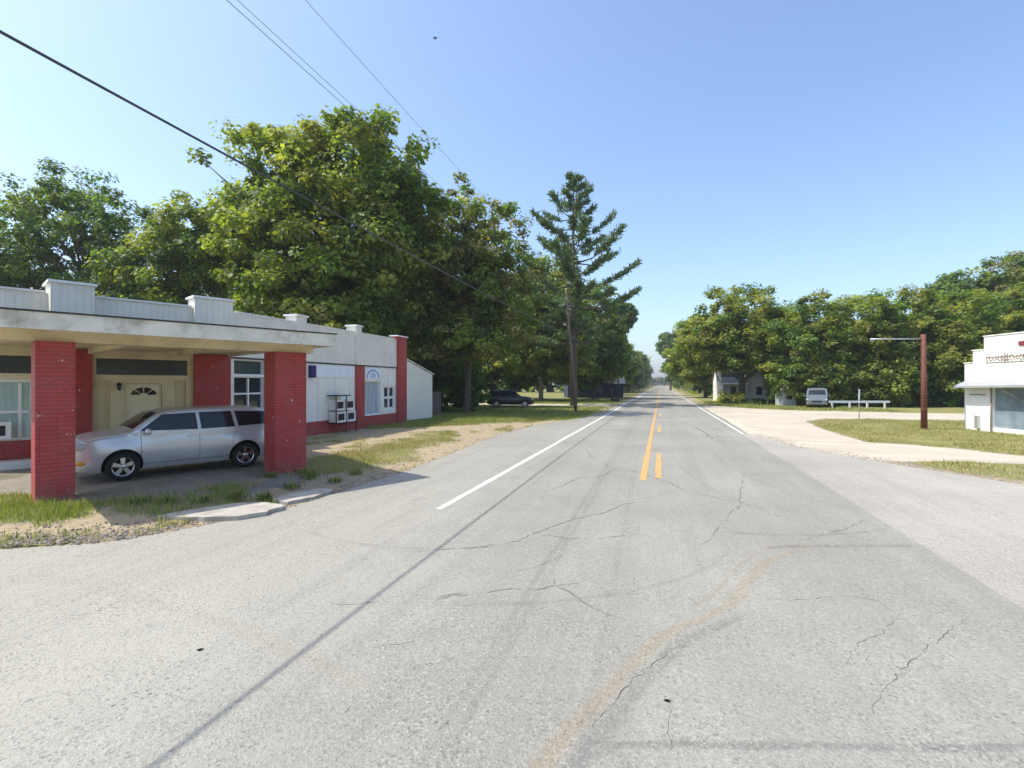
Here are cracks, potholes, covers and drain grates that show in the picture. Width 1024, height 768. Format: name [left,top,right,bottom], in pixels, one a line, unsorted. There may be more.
crack [401,500,651,554]
crack [438,557,621,619]
crack [775,596,964,713]
